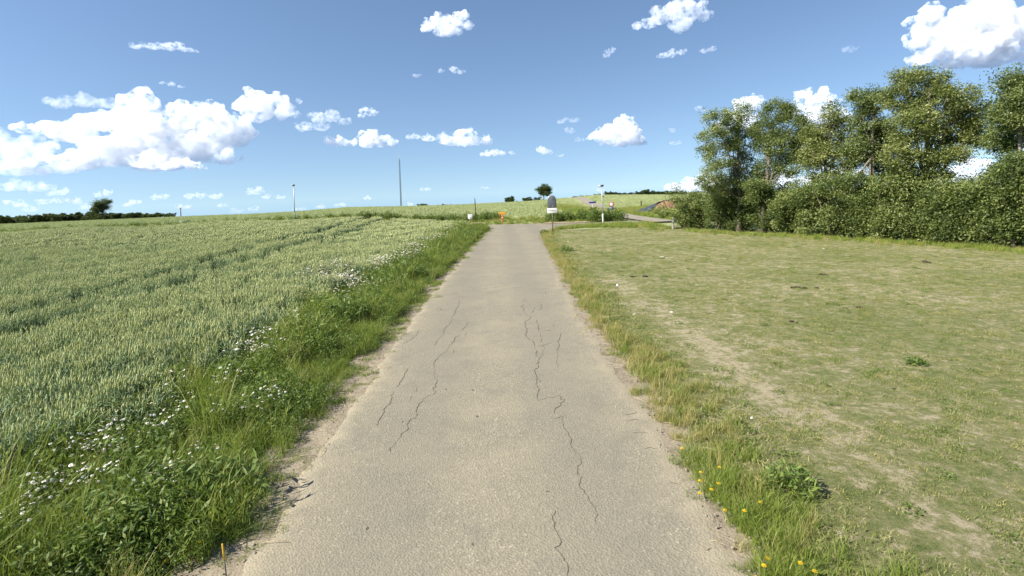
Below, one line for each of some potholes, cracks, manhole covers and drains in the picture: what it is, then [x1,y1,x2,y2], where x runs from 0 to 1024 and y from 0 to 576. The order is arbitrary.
crack [379,300,468,451]
crack [522,292,597,523]
